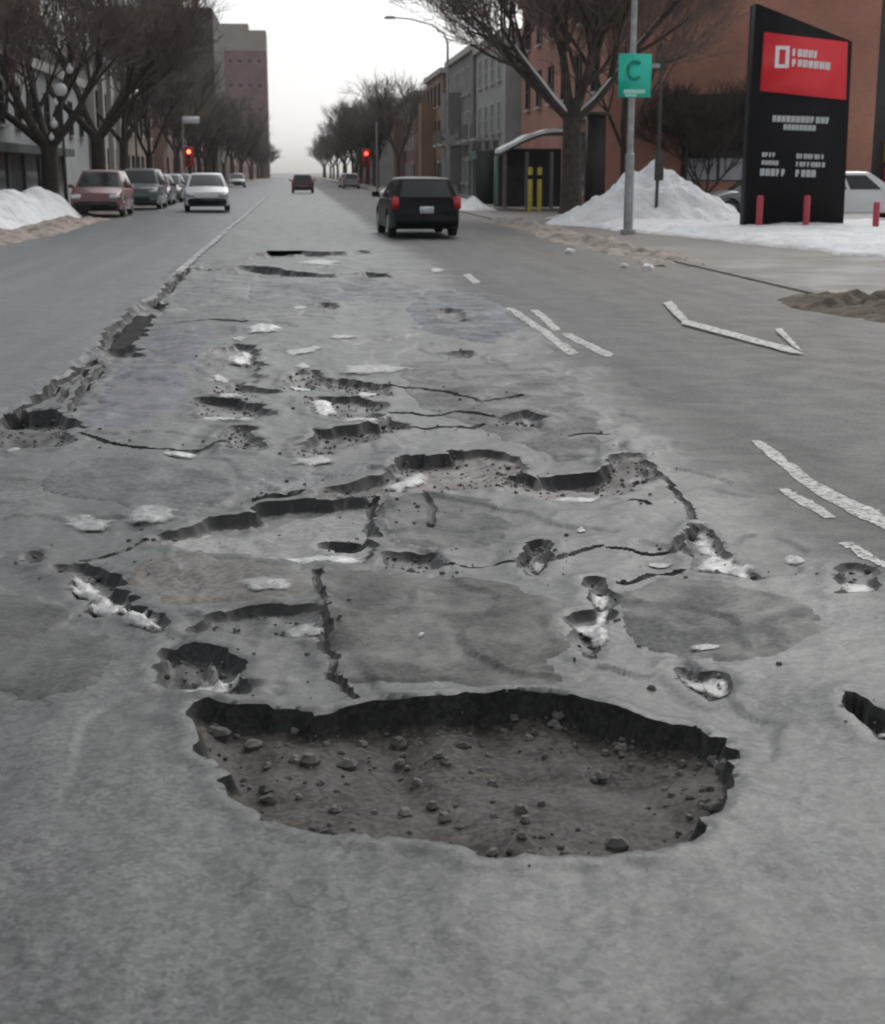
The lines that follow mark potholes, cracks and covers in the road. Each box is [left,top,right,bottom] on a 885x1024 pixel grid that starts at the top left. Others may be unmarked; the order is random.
pothole [190,397,278,420]
crack [251,489,306,502]
pothole [673,667,734,701]
pothole [500,452,656,503]
crack [79,538,149,562]
pothole [151,642,252,695]
pothole [562,576,624,659]
crack [311,567,361,699]
crack [544,459,700,586]
pothole [299,396,391,421]
crack [439,560,515,568]
pothole [153,496,380,564]
